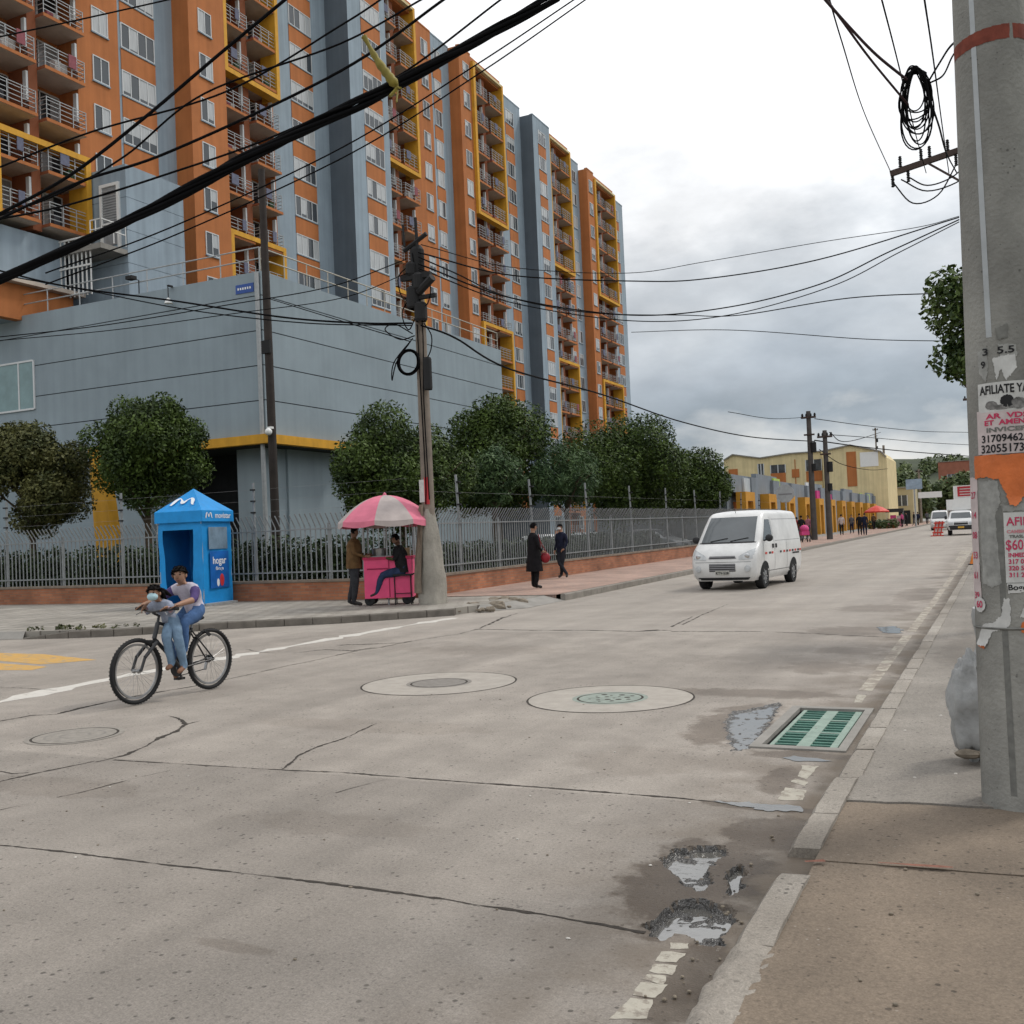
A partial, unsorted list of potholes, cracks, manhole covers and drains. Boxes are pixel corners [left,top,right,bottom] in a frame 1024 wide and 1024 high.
manhole cover [526,685,695,713]
manhole cover [360,672,517,695]
drain grate [748,706,874,753]
pothole [723,702,782,751]
crack [282,723,377,769]
manhole cover [24,727,125,745]
pothole [657,844,732,892]
pothole [723,863,751,897]
crack [1,715,198,781]
pothole [636,897,739,951]
